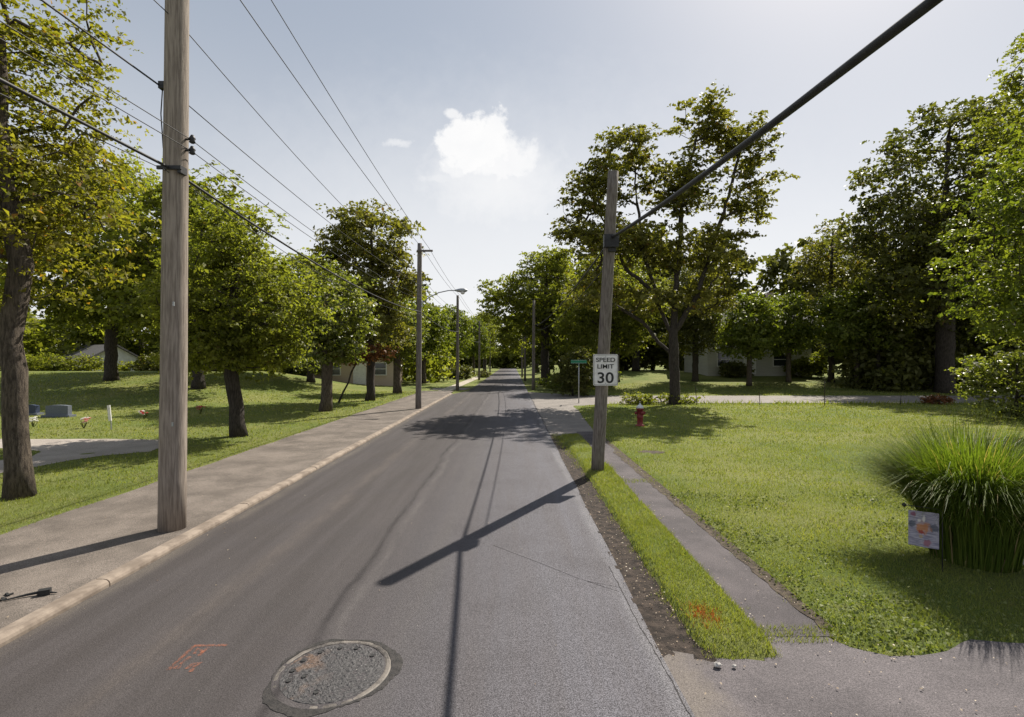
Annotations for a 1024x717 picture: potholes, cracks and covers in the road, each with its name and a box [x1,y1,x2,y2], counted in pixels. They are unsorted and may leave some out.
manhole cover [262,639,403,717]
